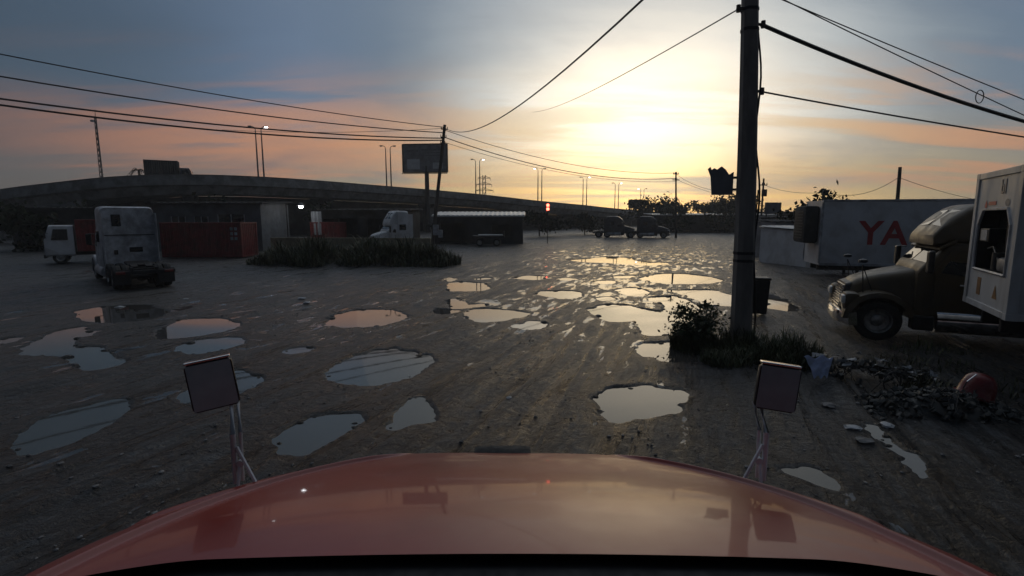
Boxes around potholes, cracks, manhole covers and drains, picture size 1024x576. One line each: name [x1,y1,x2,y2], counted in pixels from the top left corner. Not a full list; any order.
pothole [13,325,134,371]
pothole [379,394,441,432]
pothole [320,346,439,386]
pothole [70,304,171,323]
pothole [278,345,318,355]
pothole [321,308,414,328]
pothole [588,382,696,424]
pothole [262,410,370,457]
pothole [150,317,244,339]
pothole [461,307,534,322]
pothole [773,462,850,493]
pothole [3,396,138,457]
